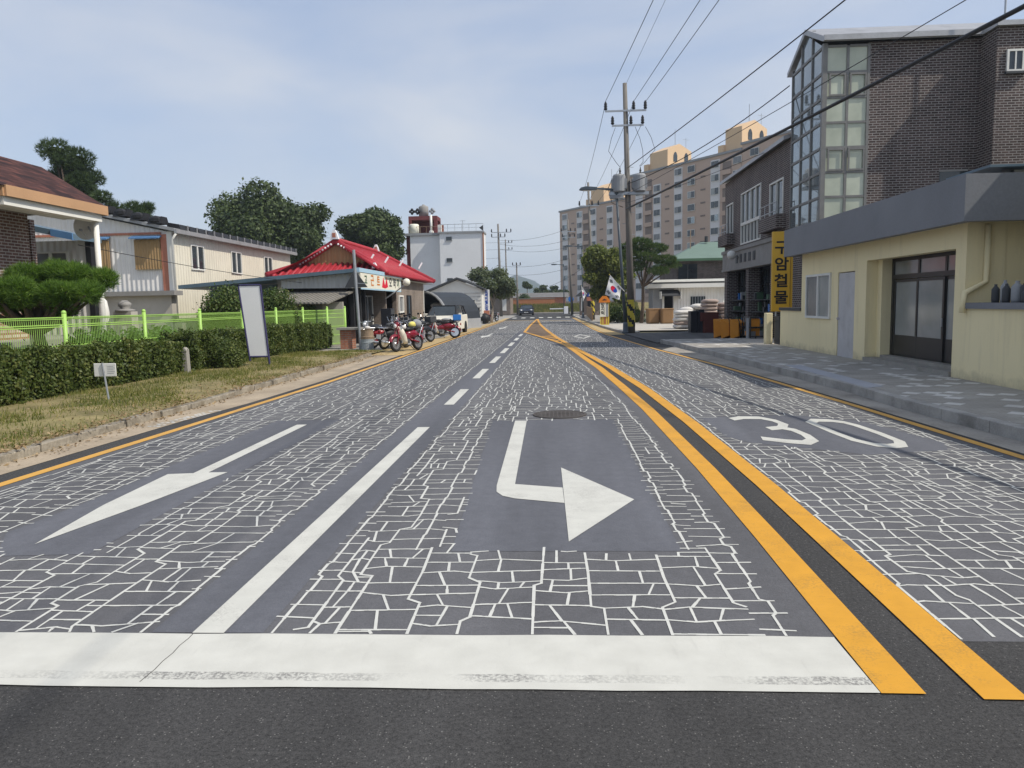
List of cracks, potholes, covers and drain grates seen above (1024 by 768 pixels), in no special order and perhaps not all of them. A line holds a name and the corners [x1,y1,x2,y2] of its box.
manhole cover [533,410,587,419]
